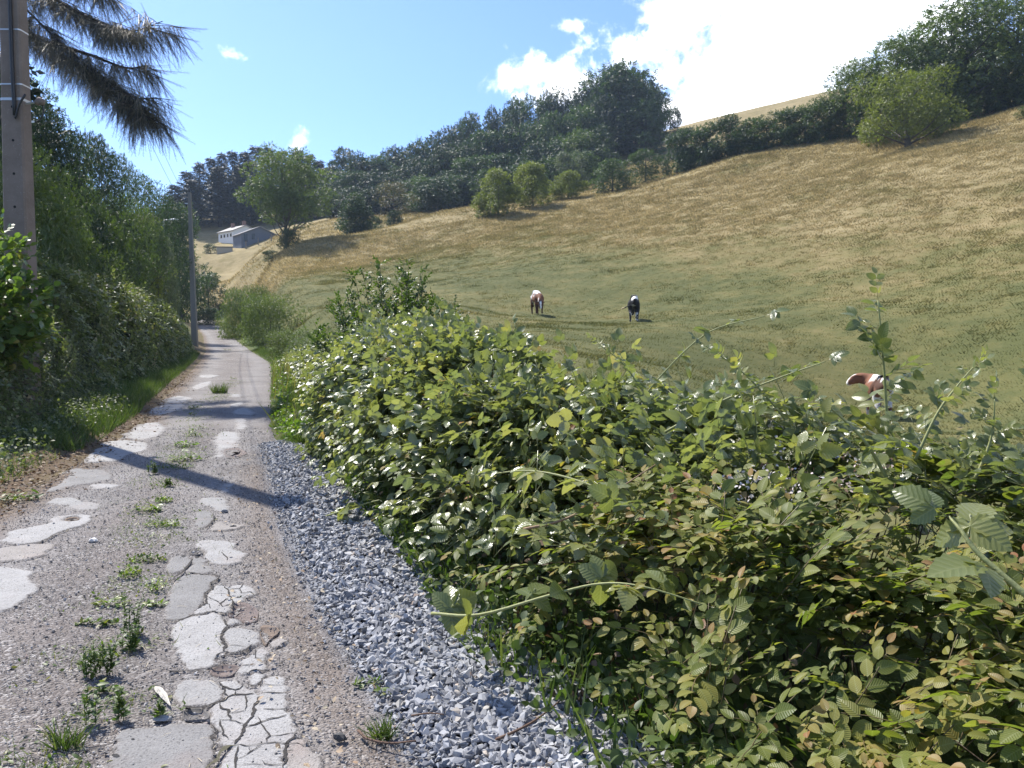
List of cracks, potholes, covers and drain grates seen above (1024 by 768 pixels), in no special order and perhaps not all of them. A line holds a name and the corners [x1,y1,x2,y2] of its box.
pothole [210,664,239,679]
crack [164,552,304,768]
